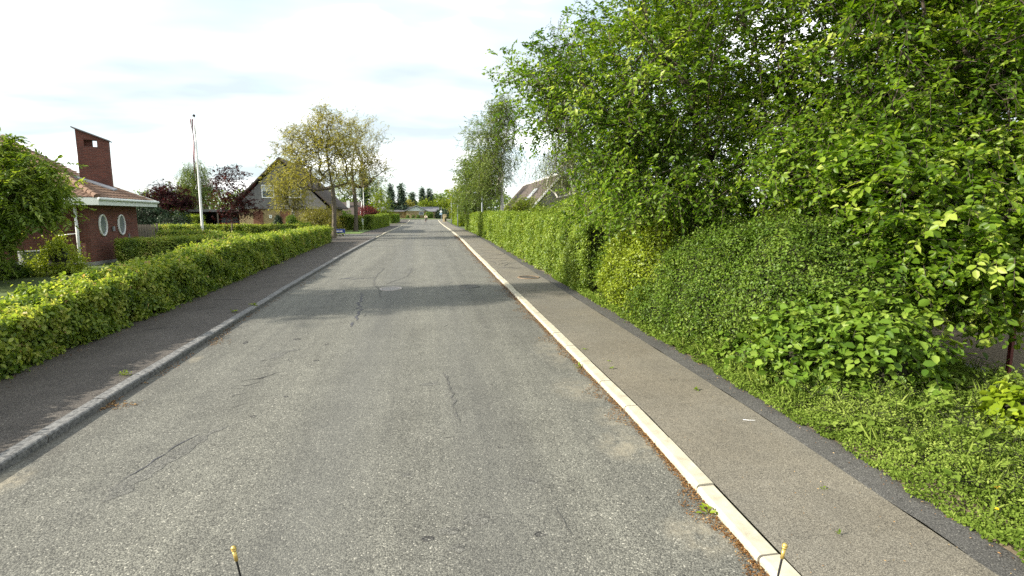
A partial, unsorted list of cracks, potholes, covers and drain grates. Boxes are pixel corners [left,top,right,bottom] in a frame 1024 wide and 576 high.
crack [119,435,197,483]
crack [442,372,460,438]
